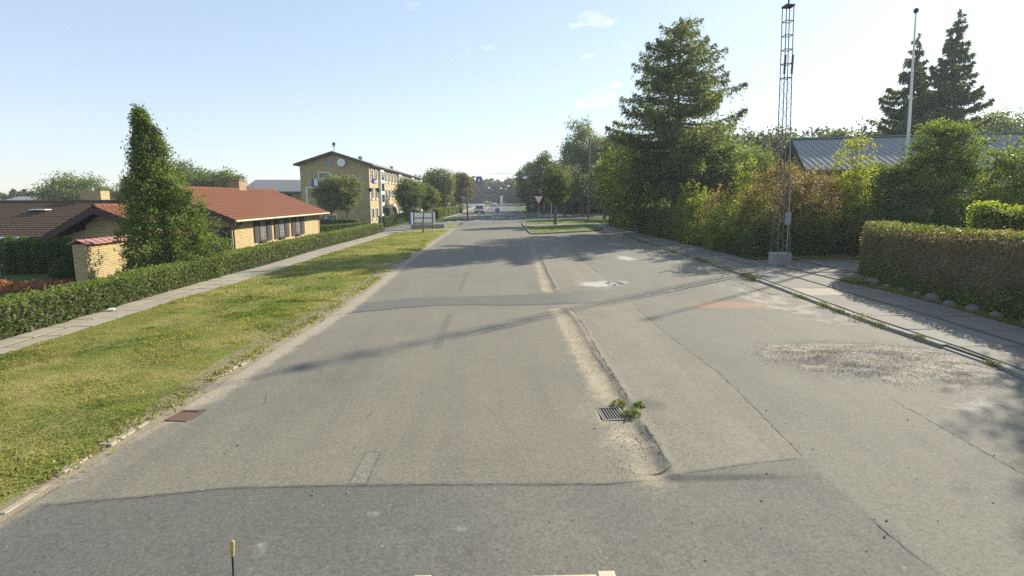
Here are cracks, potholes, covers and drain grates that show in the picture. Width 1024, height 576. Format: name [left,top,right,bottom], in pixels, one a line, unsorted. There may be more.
crack [633,423,670,475]
drain grate [164,410,204,422]
drain grate [595,407,629,421]
